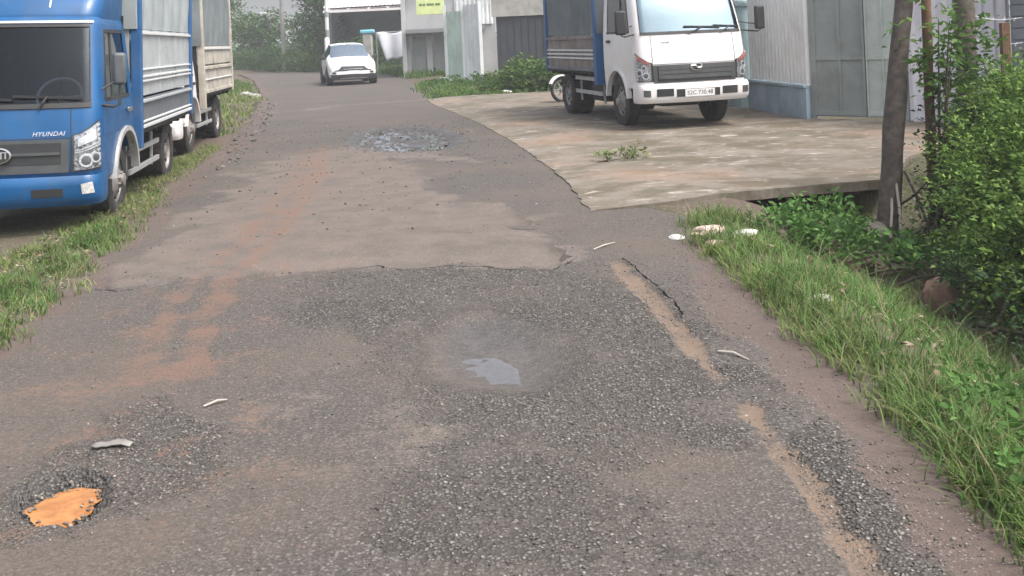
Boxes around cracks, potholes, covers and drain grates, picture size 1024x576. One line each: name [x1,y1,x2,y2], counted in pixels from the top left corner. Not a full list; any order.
pothole [406,303,598,399]
crack [621,258,684,319]
pothole [344,126,465,152]
pothole [10,466,116,529]
